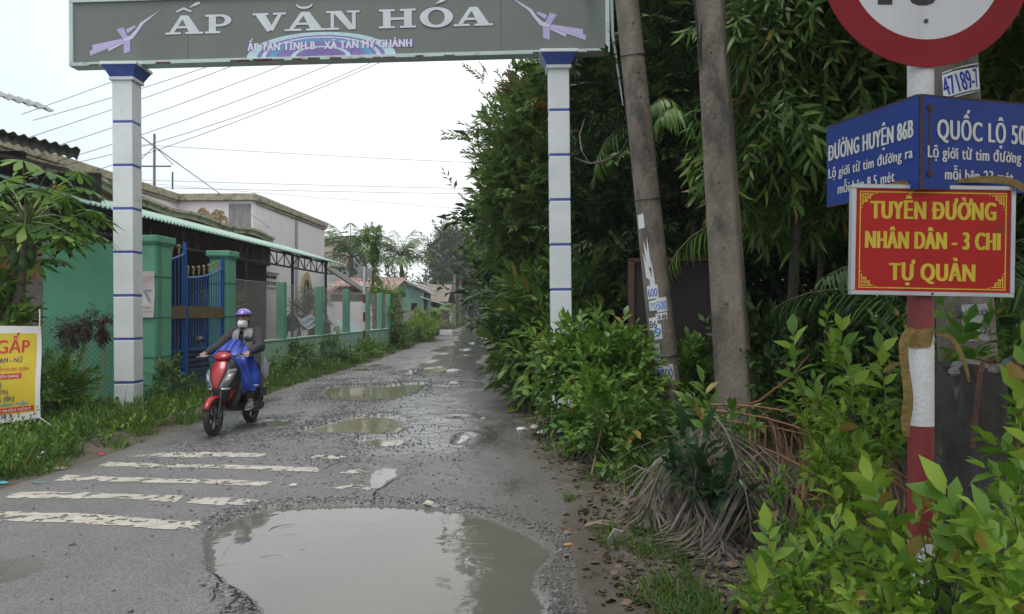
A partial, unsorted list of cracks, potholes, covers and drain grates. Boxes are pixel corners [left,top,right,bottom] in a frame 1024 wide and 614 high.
pothole [317,381,429,401]
pothole [450,431,477,445]
pothole [350,434,414,447]
pothole [357,464,406,490]
crack [210,572,256,613]
pothole [285,413,415,434]
pothole [200,500,564,614]
